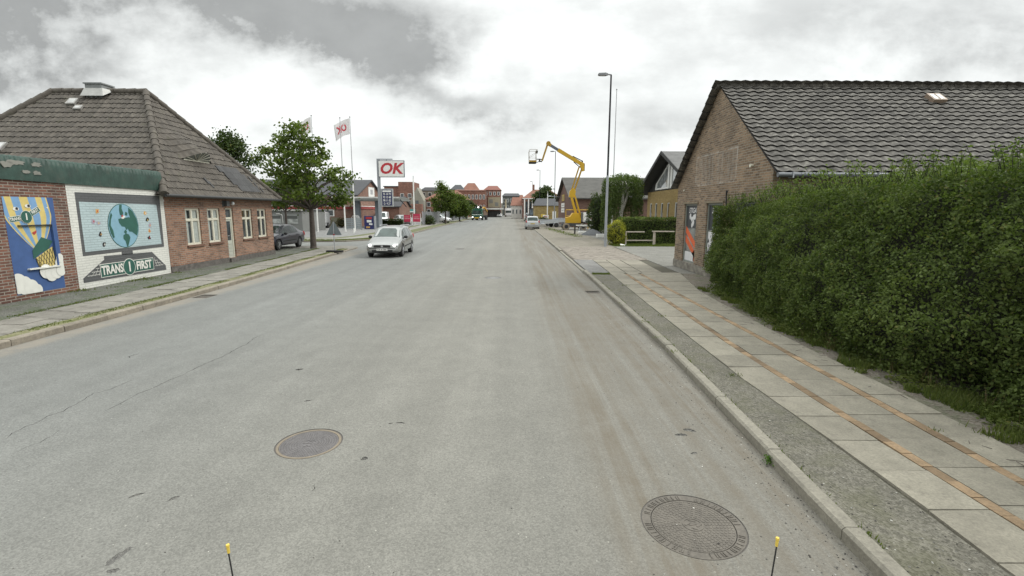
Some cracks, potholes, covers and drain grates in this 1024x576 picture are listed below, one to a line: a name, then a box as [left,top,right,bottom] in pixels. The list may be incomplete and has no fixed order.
manhole cover [274,429,343,459]
manhole cover [641,495,749,561]
